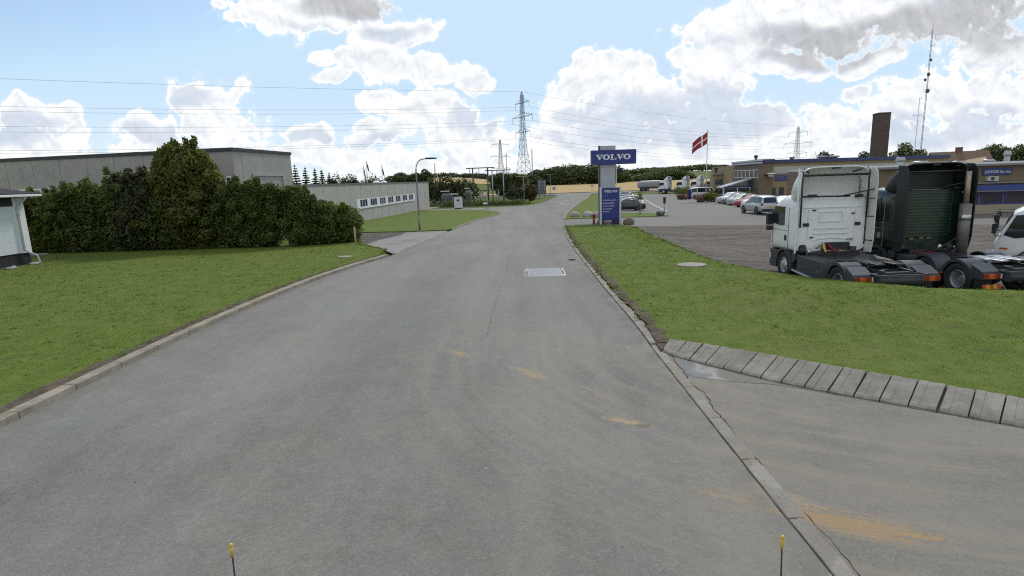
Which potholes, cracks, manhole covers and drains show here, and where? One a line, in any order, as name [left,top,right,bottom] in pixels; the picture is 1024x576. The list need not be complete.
manhole cover [524,268,566,277]
crack [668,354,761,464]
